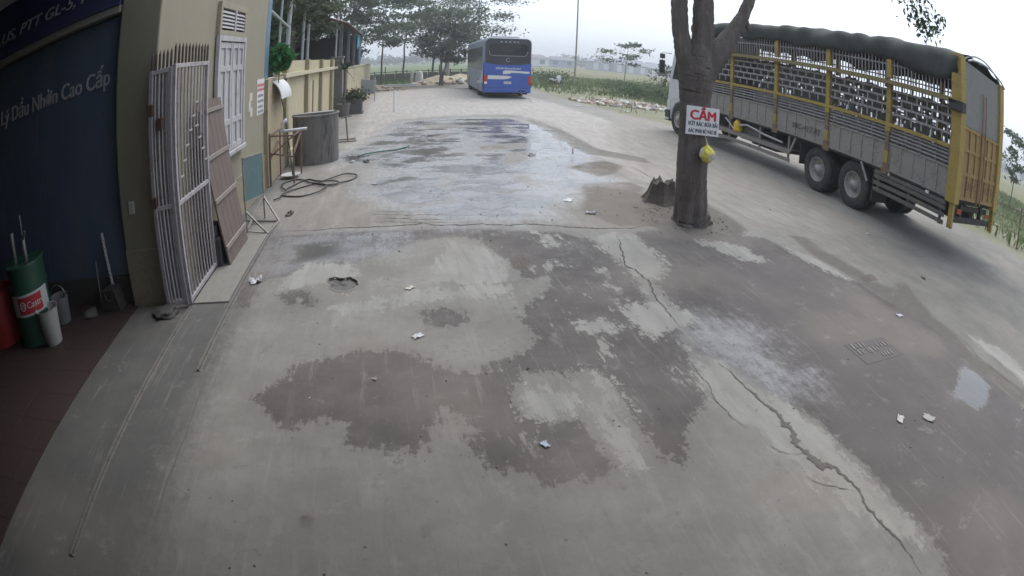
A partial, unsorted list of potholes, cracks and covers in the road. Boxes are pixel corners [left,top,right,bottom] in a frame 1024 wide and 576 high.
crack [616,234,679,325]
crack [692,364,919,569]
pothole [326,276,361,292]
drain grate [845,337,903,365]
